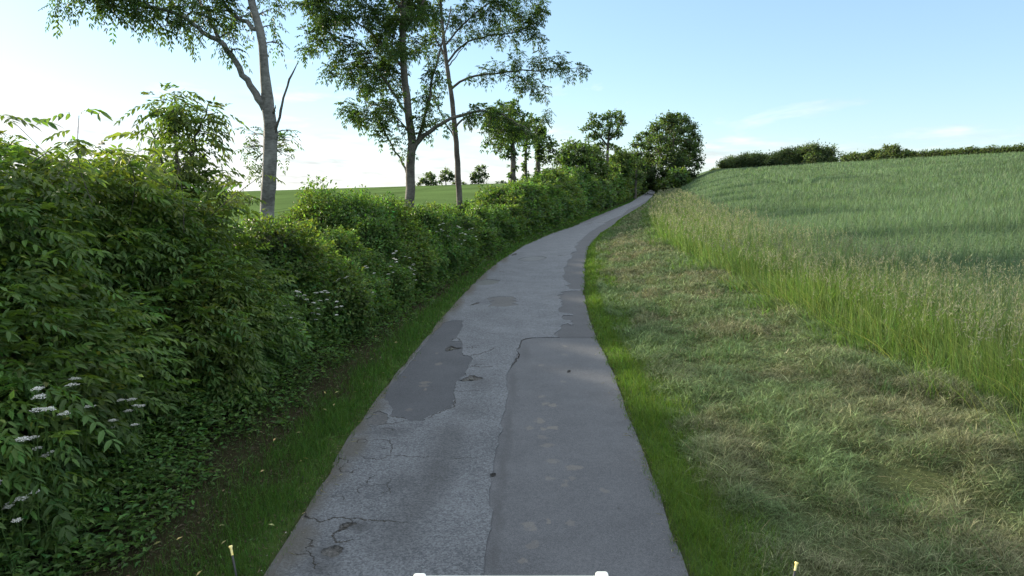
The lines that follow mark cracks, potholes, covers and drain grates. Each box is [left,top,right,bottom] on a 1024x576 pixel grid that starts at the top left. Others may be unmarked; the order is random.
crack [296,428,432,569]
pothole [321,545,344,558]
